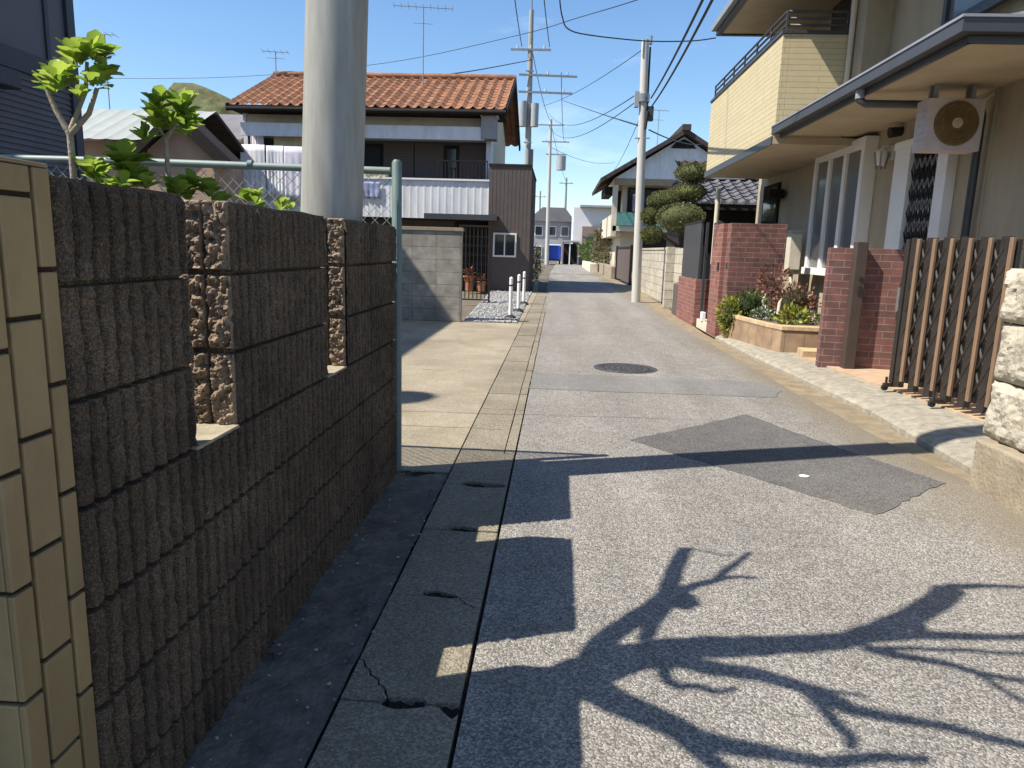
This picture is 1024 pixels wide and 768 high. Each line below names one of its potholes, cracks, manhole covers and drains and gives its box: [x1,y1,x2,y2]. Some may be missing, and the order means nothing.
manhole cover [594,363,657,374]
